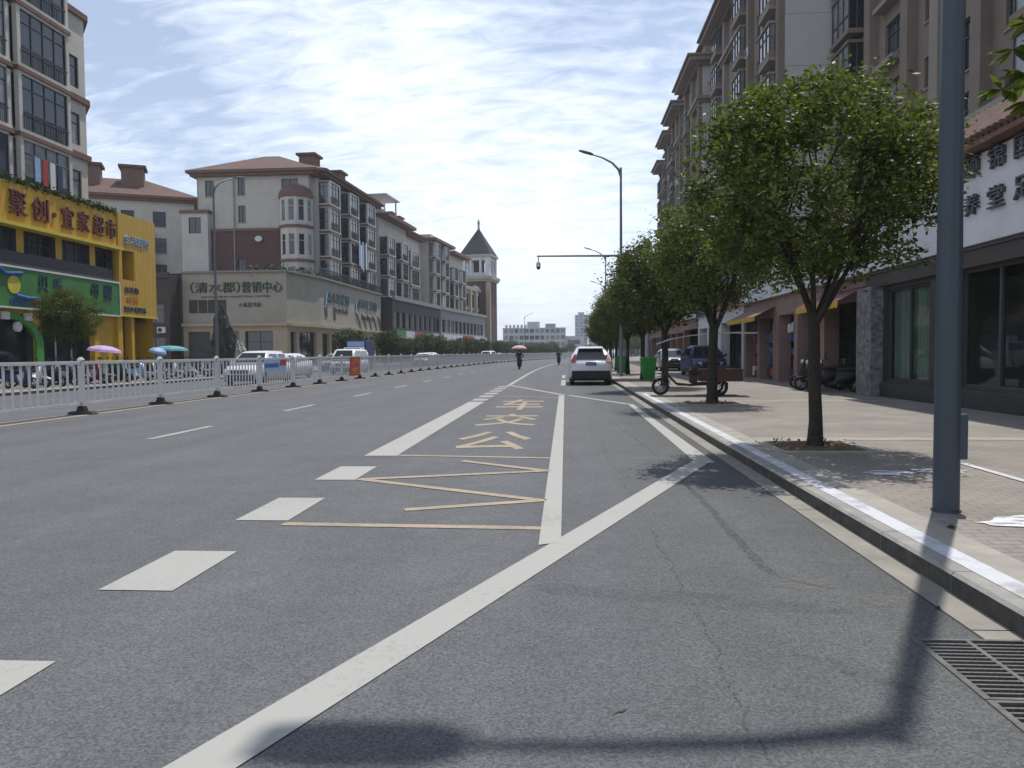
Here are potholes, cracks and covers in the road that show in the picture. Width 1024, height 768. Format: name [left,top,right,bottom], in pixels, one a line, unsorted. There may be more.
drain grate [911,638,1024,733]
